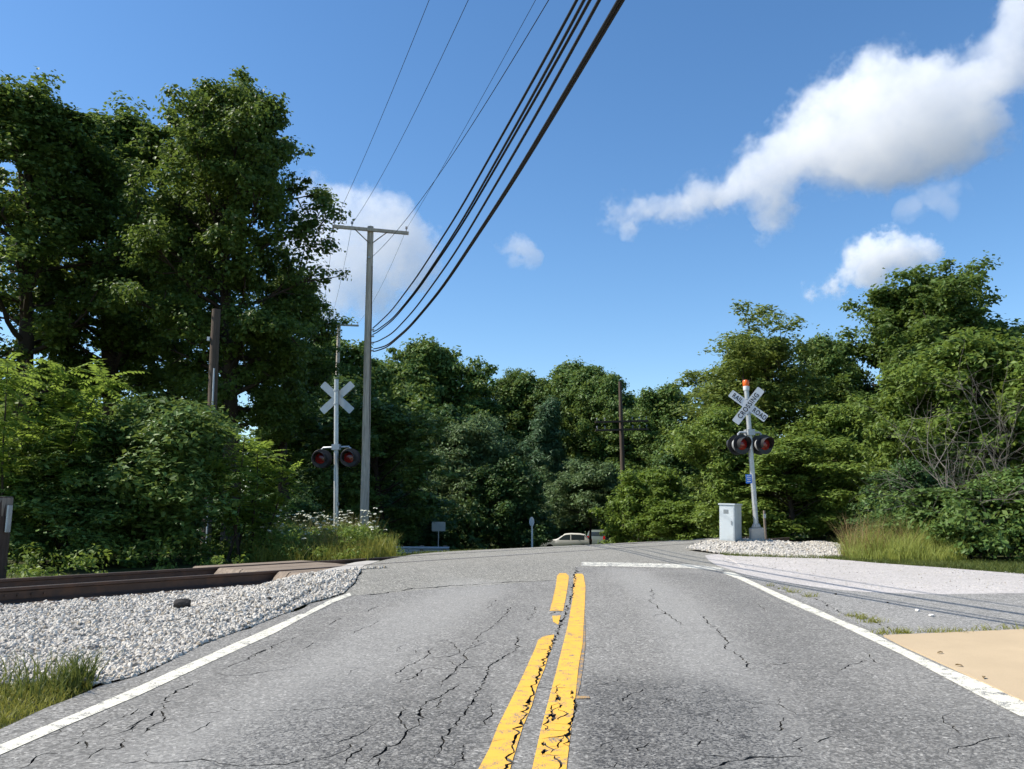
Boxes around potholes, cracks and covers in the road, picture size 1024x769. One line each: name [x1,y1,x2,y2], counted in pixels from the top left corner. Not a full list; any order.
crack [532,687,578,768]
crack [325,600,556,769]
crack [25,684,306,767]
